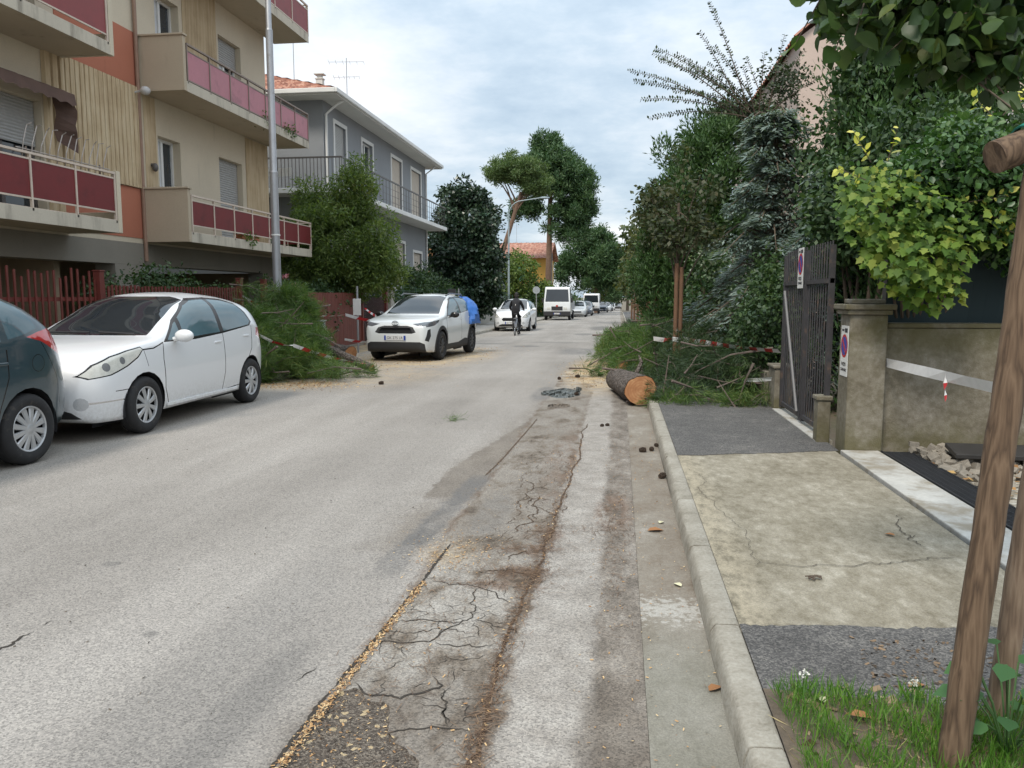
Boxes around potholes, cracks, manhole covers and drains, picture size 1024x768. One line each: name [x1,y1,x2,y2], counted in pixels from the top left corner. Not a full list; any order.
pothole [541,387,582,398]
crack [0,621,50,649]
crack [314,424,588,768]
